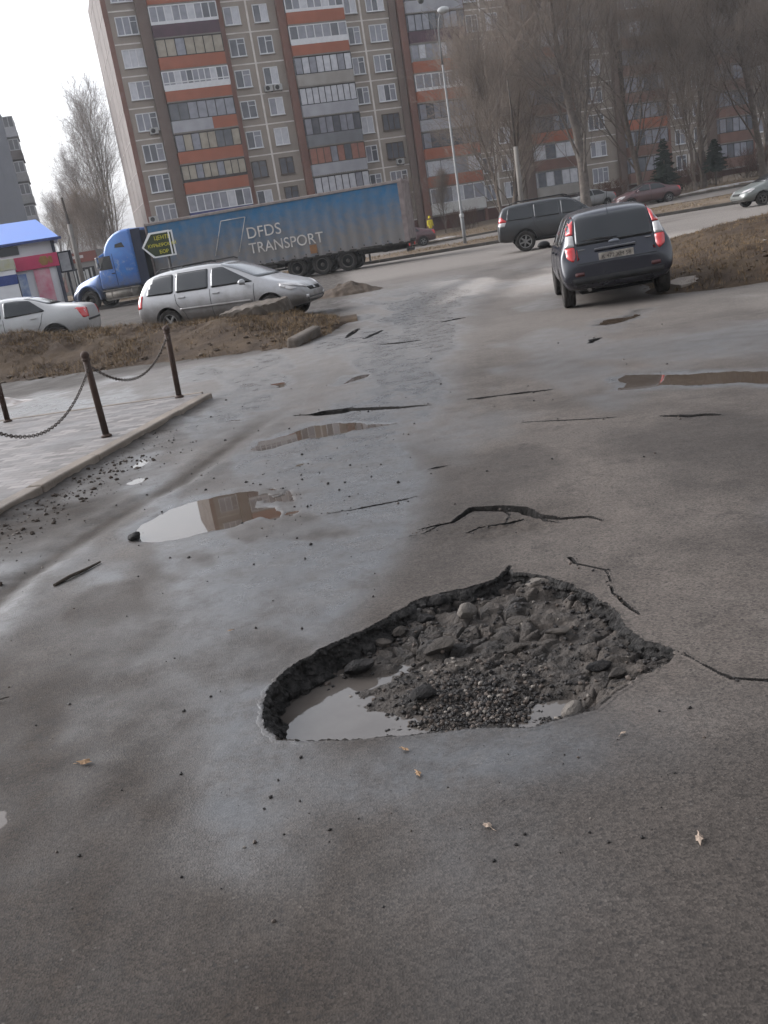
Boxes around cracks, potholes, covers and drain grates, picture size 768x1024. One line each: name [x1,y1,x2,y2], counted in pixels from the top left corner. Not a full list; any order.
pothole [256,563,685,745]
crack [673,650,768,684]
crack [314,496,644,616]
crack [464,388,623,424]
crack [289,404,437,417]
crack [339,315,480,346]
